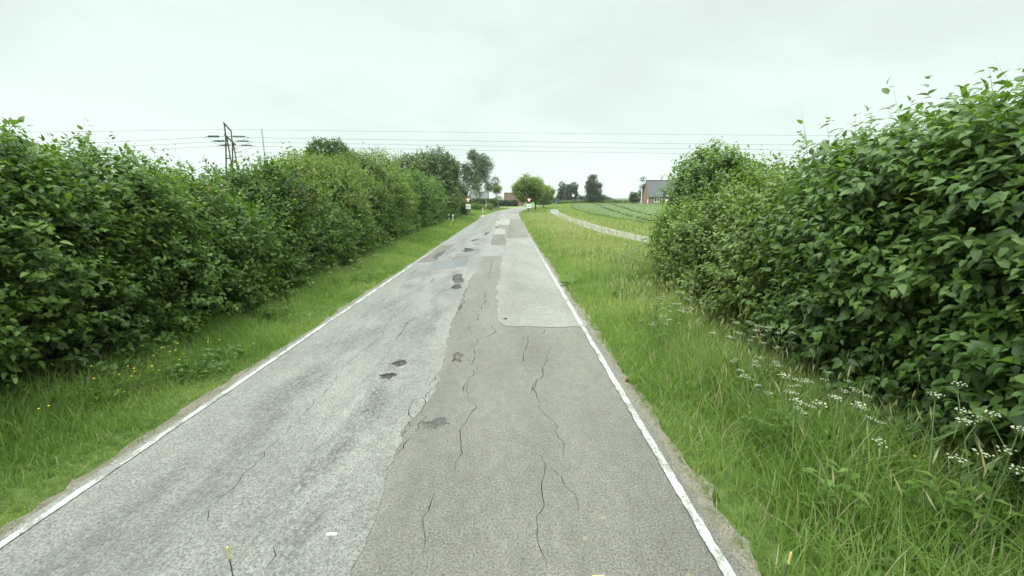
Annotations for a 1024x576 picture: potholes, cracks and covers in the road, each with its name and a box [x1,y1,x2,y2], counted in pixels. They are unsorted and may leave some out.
pothole [421,418,450,429]
crack [454,267,494,473]
crack [536,465,579,567]
